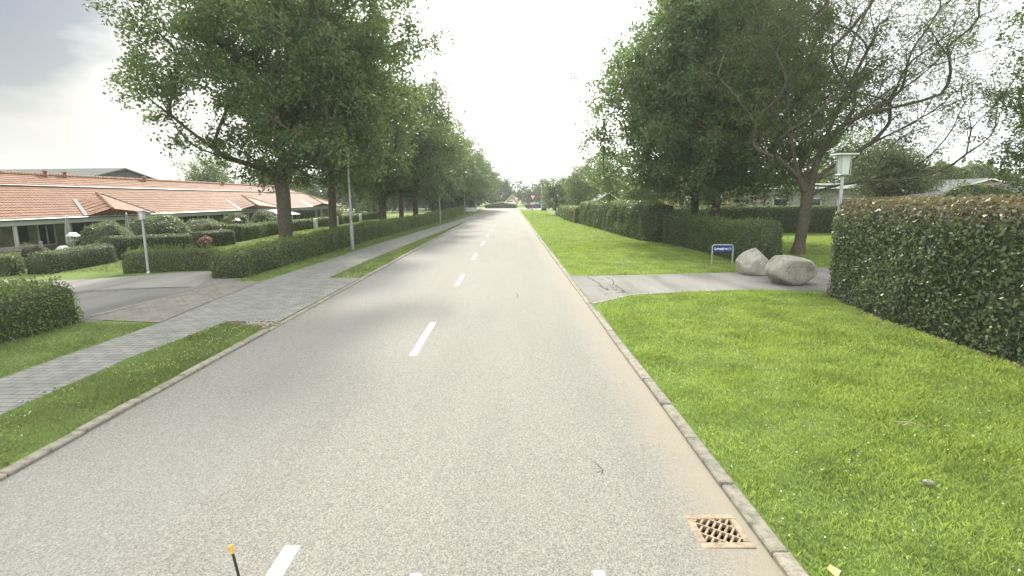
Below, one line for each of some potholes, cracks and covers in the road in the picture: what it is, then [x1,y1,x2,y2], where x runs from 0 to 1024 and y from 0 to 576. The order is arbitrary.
drain grate [684,515,756,549]
